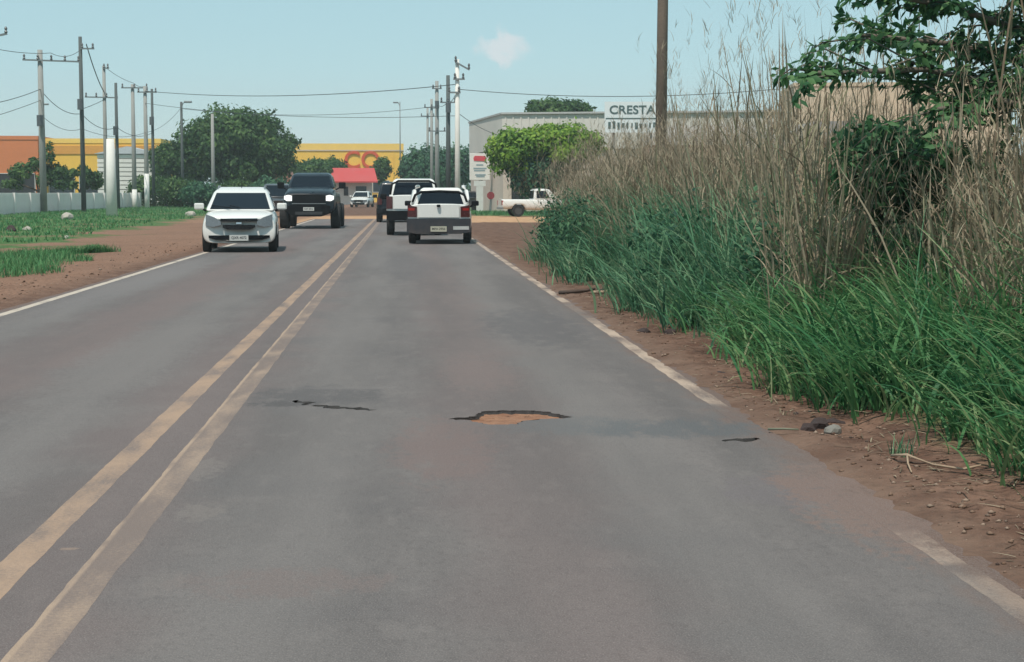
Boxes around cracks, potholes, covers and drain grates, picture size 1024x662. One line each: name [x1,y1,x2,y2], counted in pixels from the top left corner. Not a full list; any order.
crack [292,401,370,411]
crack [722,432,771,442]
pothole [451,410,570,425]
